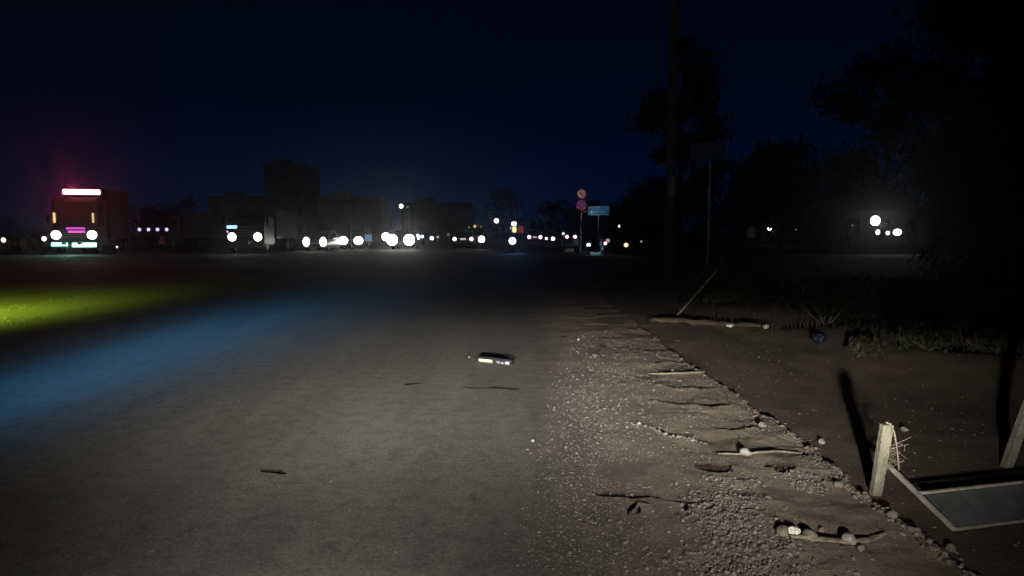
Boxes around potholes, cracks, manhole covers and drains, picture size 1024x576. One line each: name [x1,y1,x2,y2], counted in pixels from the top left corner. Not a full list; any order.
crack [648,384,739,407]
crack [626,422,707,444]
